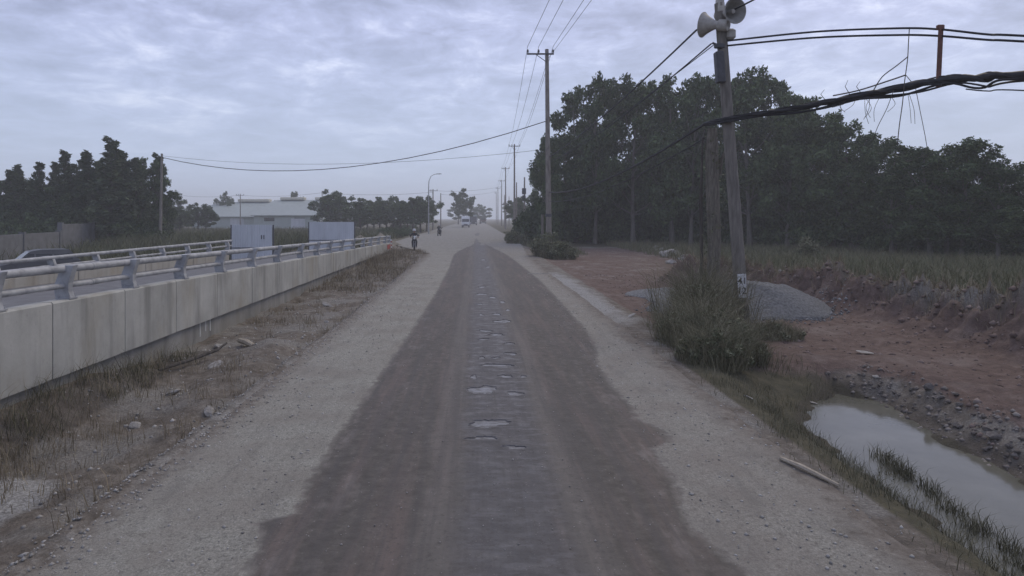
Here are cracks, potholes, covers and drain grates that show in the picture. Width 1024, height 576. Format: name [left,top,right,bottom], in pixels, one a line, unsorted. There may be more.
pothole [458,434,504,442]
pothole [462,384,501,395]
pothole [495,443,532,451]
pothole [463,418,516,430]
